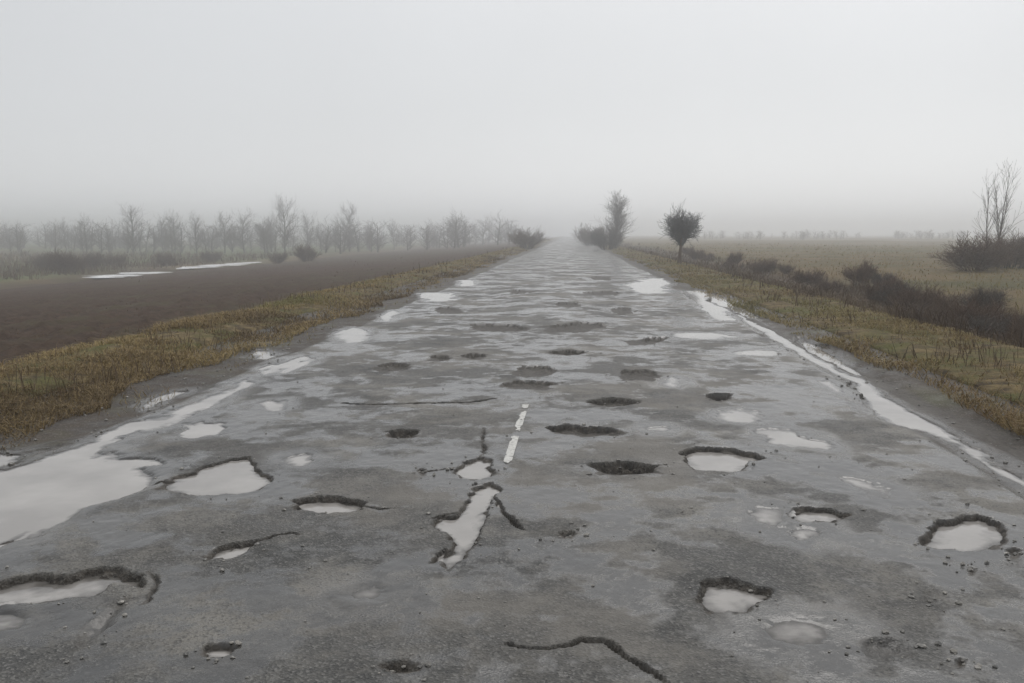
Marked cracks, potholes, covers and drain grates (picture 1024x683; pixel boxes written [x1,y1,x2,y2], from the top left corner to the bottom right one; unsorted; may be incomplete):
pothole [449,455,503,482]
pothole [673,446,772,474]
pothole [193,538,268,563]
pothole [189,640,250,662]
pothole [496,379,568,391]
pothole [685,574,781,618]
pothole [543,422,638,438]
pothole [425,481,506,576]
pothole [429,306,465,314]
pothole [0,564,162,607]
pothole [583,397,645,408]
